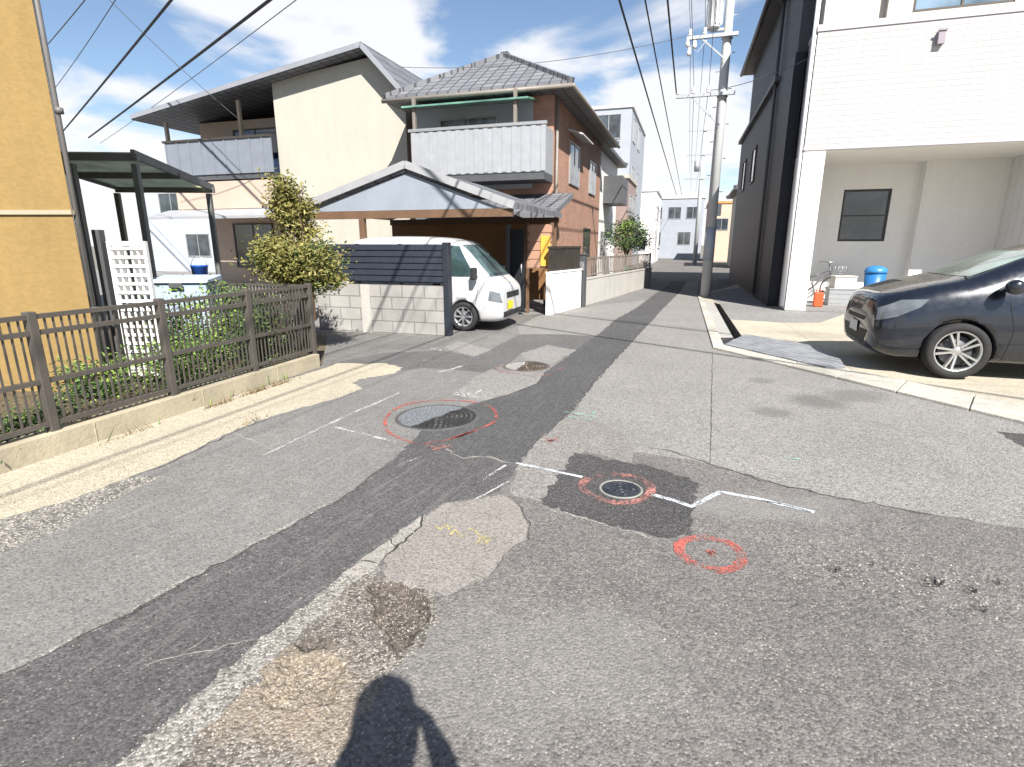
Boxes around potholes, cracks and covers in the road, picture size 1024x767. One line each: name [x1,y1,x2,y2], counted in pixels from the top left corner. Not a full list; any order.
pothole [915,576,945,587]
manhole cover [395,404,480,431]
pothole [292,635,330,653]
manhole cover [503,361,550,372]
pothole [365,580,432,652]
crack [148,629,245,665]
manhole cover [599,480,643,499]
